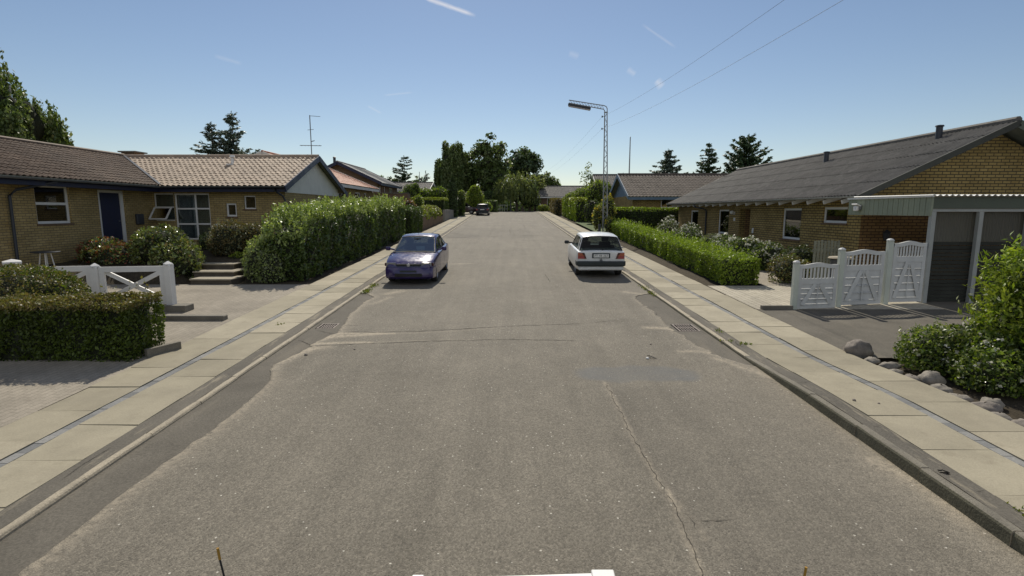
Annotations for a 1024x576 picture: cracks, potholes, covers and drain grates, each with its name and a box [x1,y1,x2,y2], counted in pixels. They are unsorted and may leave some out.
drain grate [671,324,701,332]
crack [606,385,723,576]
